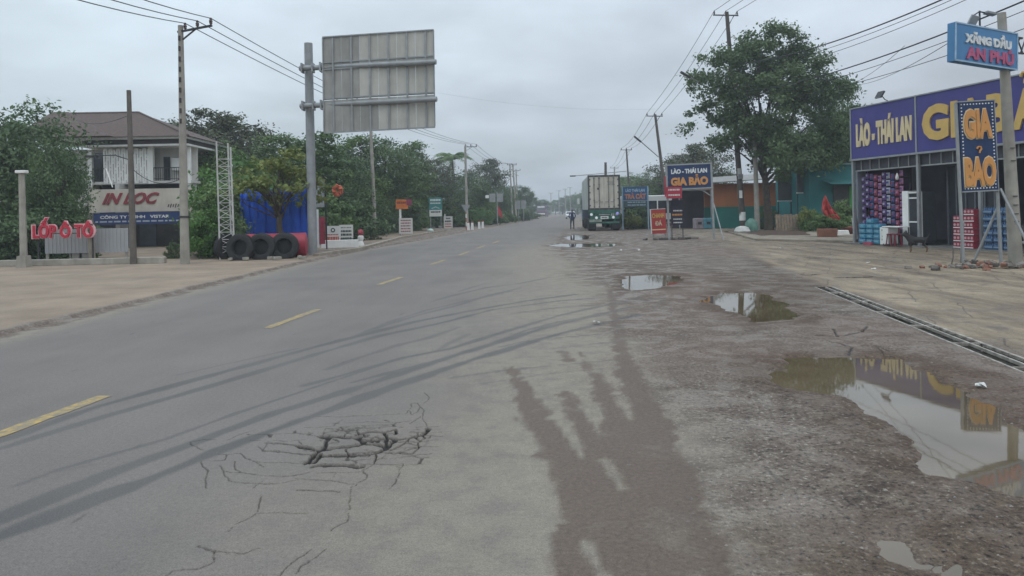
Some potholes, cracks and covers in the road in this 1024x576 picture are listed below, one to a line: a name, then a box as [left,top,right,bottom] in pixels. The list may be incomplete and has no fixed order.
pothole [616,273,688,291]
crack [162,391,445,576]
crack [800,315,893,359]
drain grate [815,287,1024,373]
pothole [690,291,803,323]
